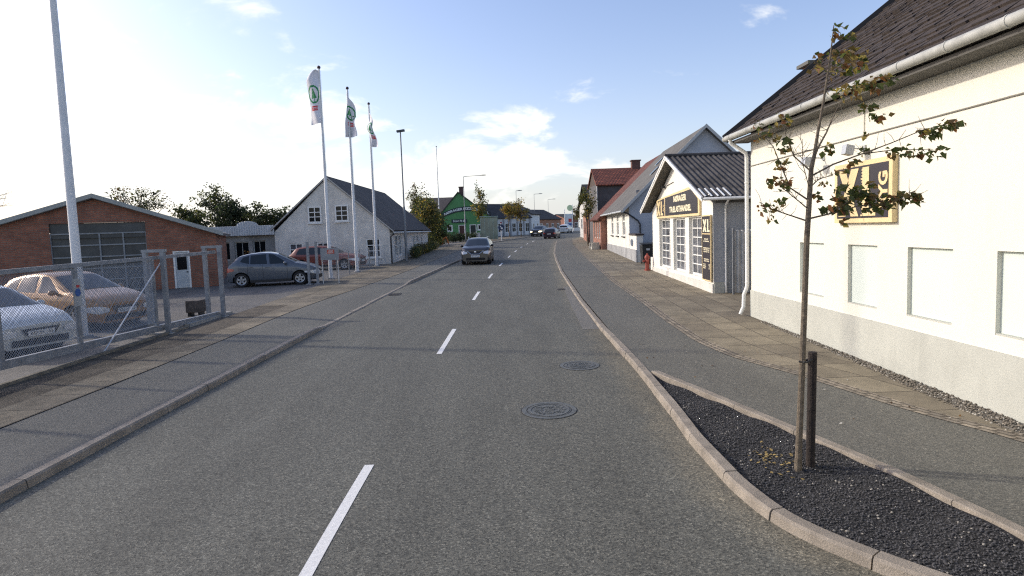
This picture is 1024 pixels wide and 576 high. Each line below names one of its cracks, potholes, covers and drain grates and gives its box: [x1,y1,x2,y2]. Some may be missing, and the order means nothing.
manhole cover [521,402,577,419]
manhole cover [559,361,600,370]
